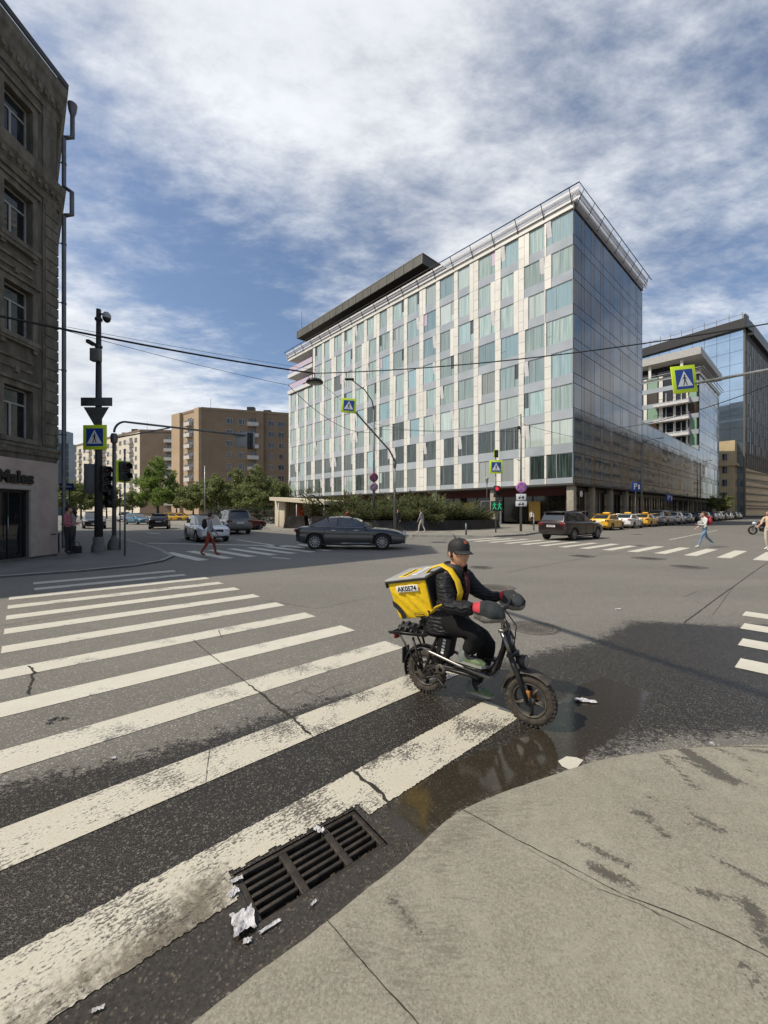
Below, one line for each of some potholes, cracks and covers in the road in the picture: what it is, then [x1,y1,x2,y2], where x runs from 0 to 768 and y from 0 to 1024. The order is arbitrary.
drain grate [235,811,387,927]
crack [194,630,390,806]
manhole cover [509,621,561,635]
crack [26,666,38,694]
